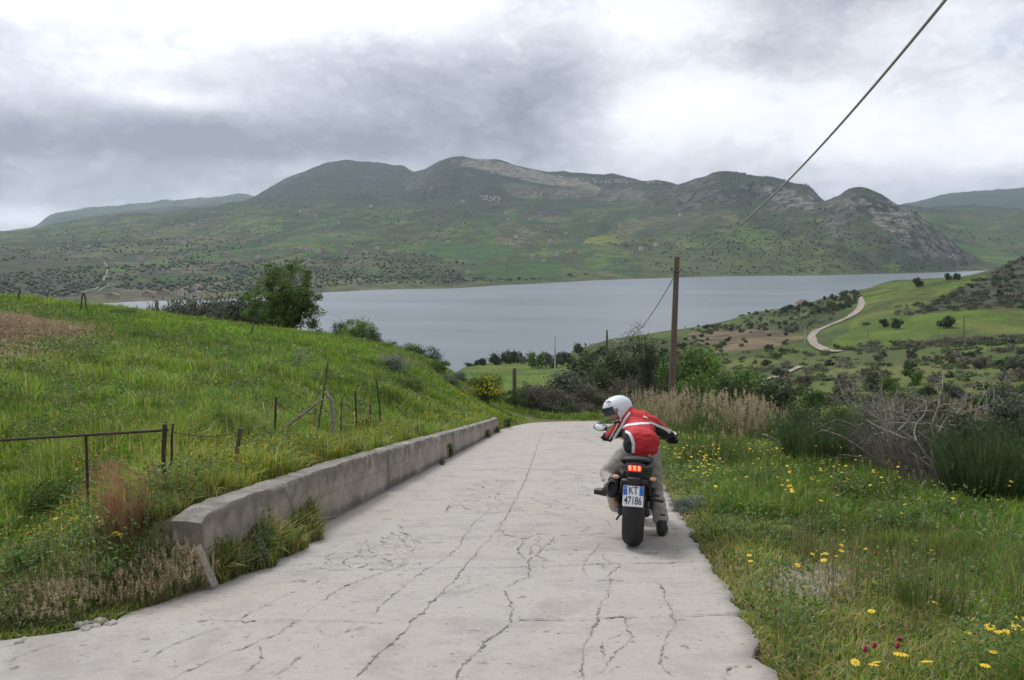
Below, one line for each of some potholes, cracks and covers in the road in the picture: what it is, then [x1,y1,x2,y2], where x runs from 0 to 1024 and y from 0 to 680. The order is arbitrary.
crack [444,466,613,679]
crack [579,558,634,675]
crack [657,582,676,676]
crack [151,478,514,678]
